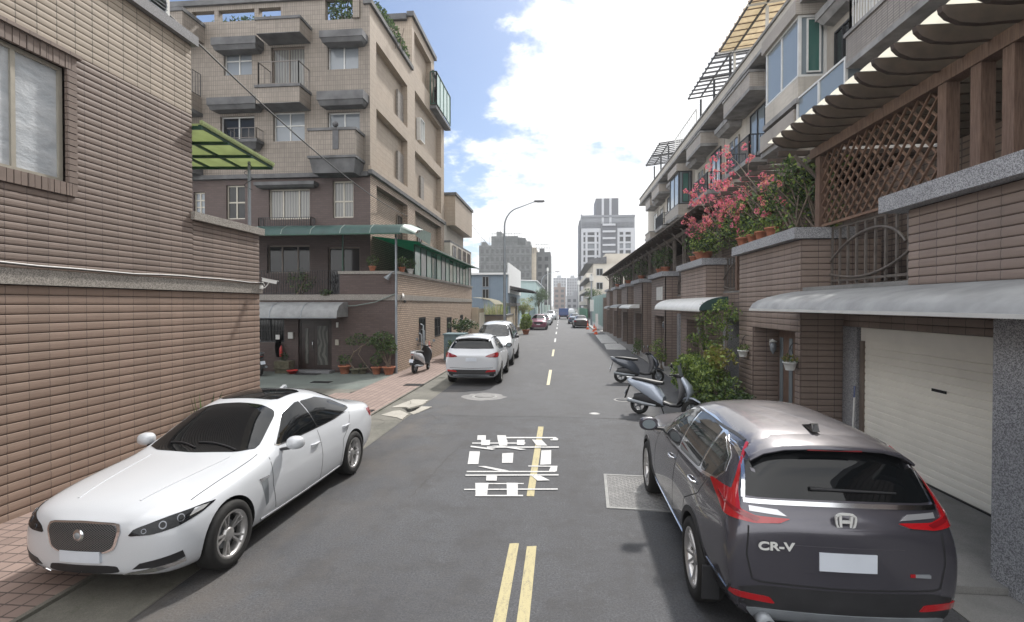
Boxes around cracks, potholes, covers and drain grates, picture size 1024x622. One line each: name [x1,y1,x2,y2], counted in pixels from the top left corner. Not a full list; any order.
manhole cover [604,474,671,512]
manhole cover [461,393,506,401]
